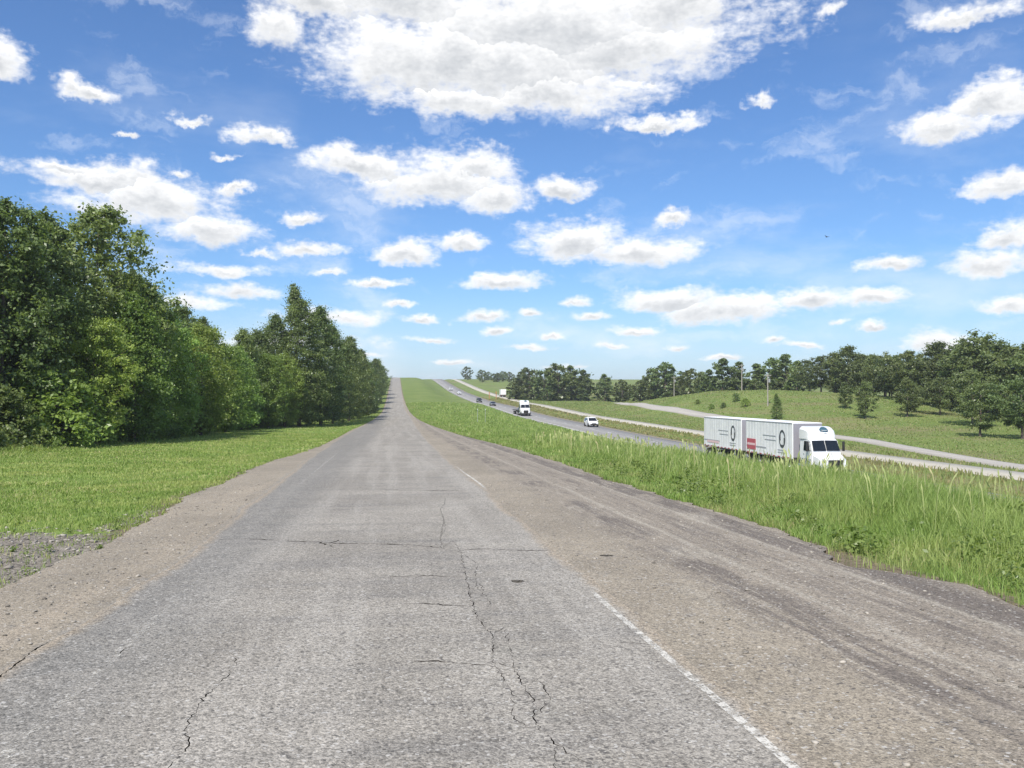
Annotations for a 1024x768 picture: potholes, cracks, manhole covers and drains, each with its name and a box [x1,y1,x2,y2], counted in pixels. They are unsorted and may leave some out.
crack [0,642,48,677]
crack [261,503,599,768]
crack [168,657,237,768]
